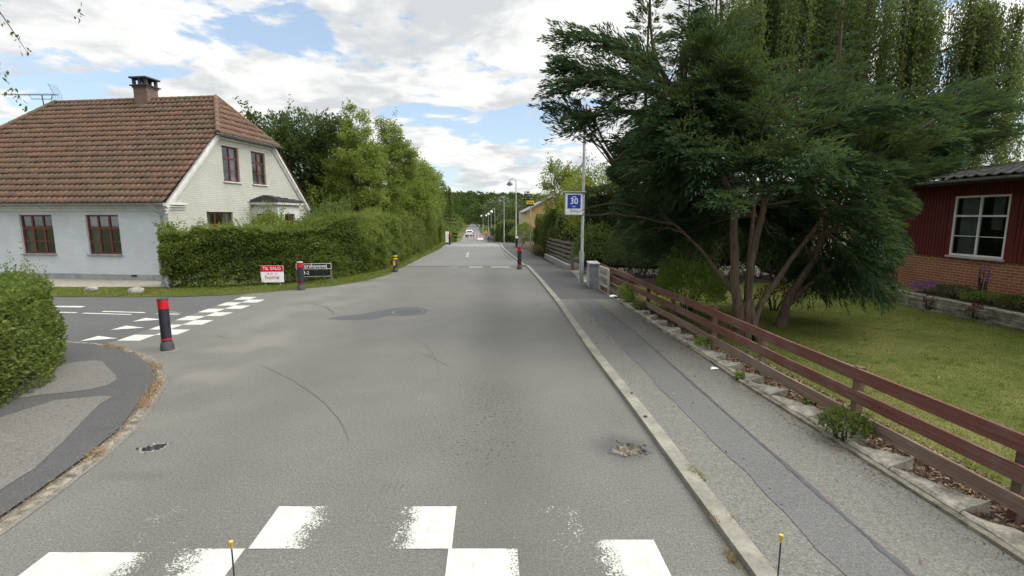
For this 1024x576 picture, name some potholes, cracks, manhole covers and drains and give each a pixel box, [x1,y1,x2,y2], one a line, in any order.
crack [263,366,349,441]
pothole [608,440,652,457]
pothole [136,441,172,453]
